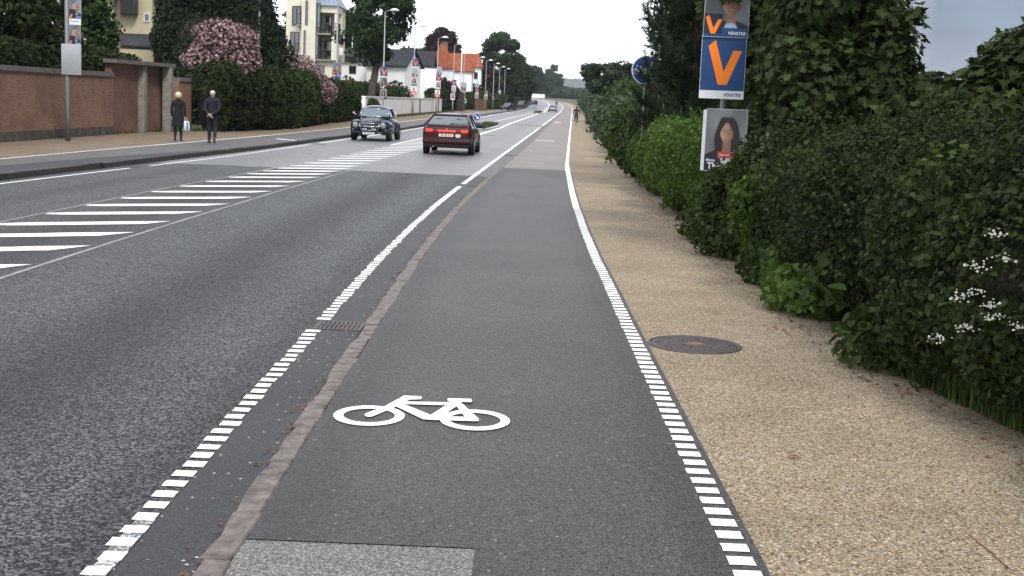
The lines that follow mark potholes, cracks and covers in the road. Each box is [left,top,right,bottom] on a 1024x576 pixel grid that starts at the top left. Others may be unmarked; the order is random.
manhole cover [647,335,742,354]
drain grate [313,320,366,332]
